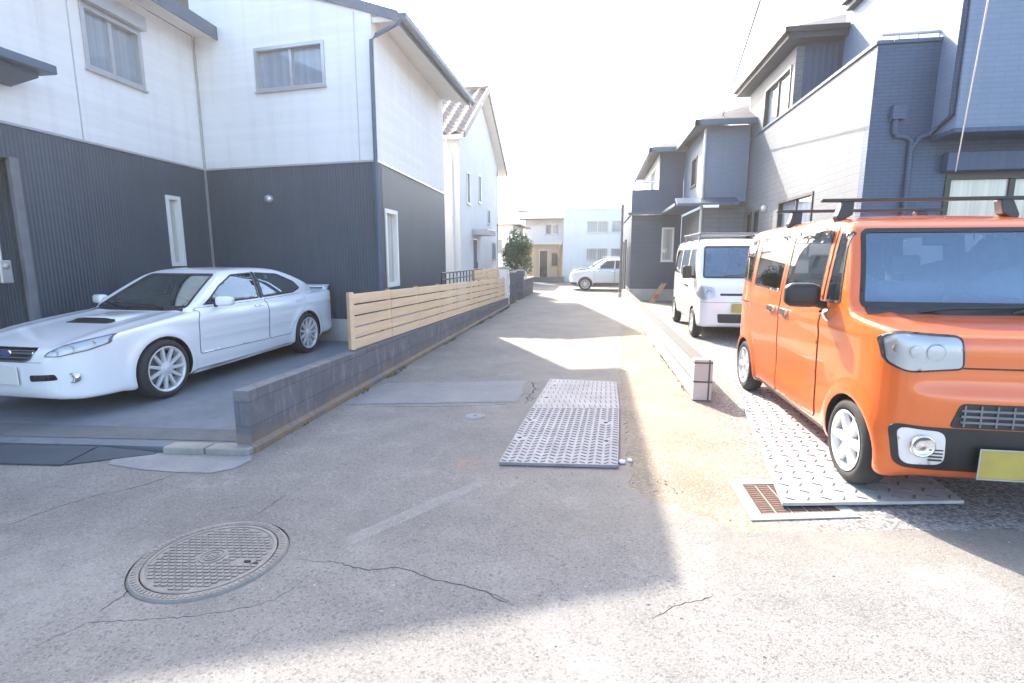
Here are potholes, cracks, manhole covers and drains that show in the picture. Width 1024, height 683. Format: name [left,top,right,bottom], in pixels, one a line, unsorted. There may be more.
manhole cover [124,521,290,604]
crack [653,596,712,618]
drain grate [727,479,861,522]
crack [21,558,518,658]
